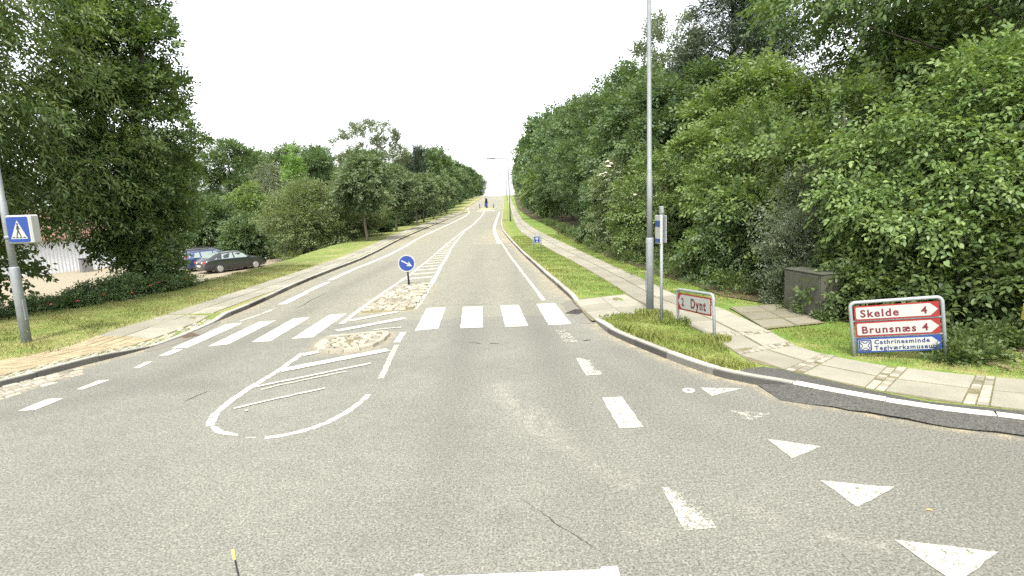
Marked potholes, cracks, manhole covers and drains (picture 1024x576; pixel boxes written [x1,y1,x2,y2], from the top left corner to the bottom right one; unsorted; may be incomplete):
crack [523,500,601,552]
